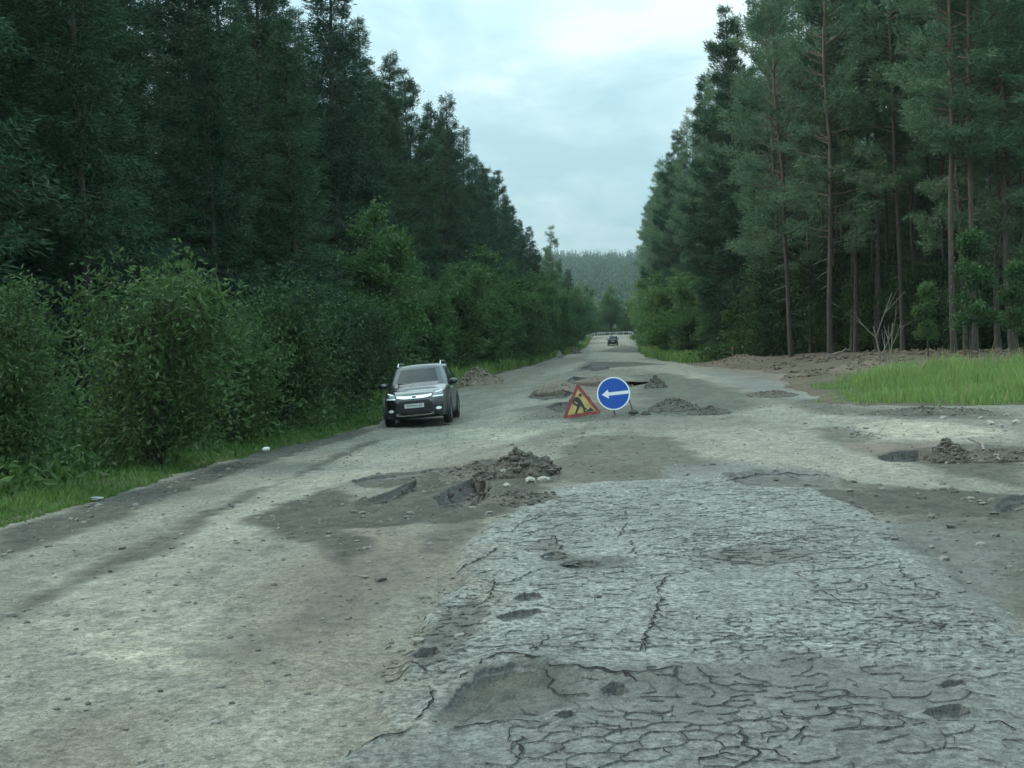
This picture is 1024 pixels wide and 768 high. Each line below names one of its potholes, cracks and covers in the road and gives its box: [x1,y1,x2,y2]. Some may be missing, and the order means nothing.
pothole [858,450,931,466]
pothole [479,606,561,627]
pothole [416,479,508,510]
pothole [497,591,560,606]
crack [345,471,1024,768]
pothole [354,478,429,508]
pothole [523,550,586,565]
pothole [433,655,549,724]
pothole [543,559,621,572]
